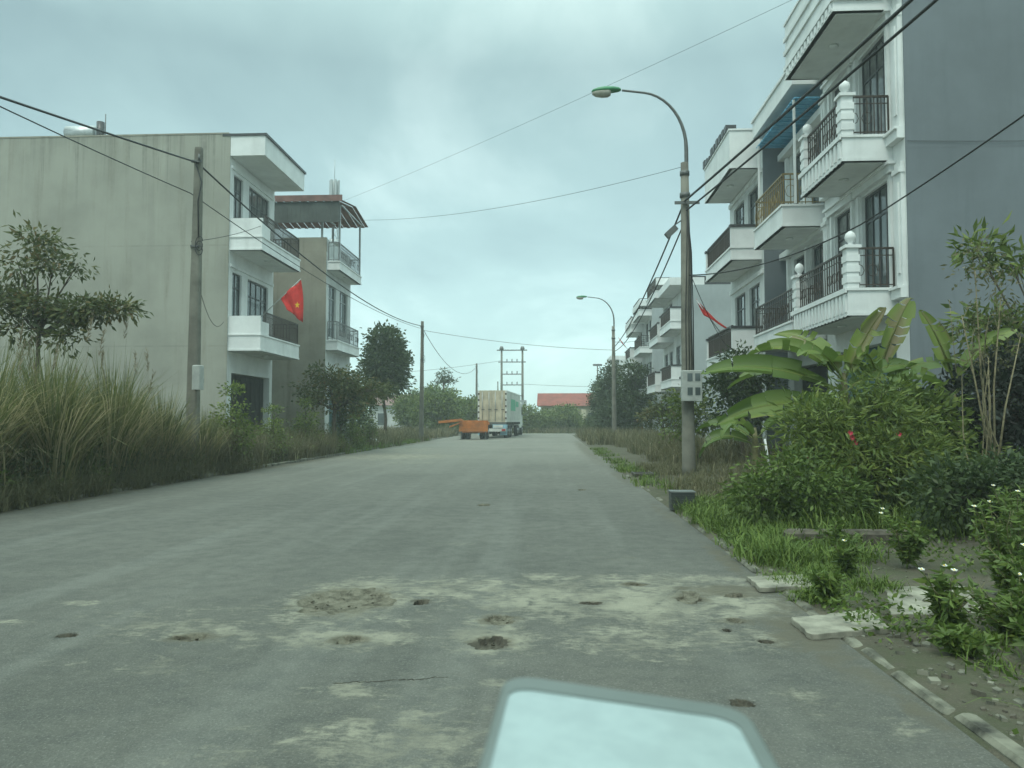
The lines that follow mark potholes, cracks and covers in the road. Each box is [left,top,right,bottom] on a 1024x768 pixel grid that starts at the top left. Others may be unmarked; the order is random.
pothole [453,631,524,654]
pothole [318,633,379,648]
pothole [665,588,714,607]
pothole [393,597,441,608]
pothole [743,636,789,648]
pothole [469,612,527,629]
pothole [284,585,415,618]
crack [322,673,462,690]
pothole [567,599,614,608]
pothole [154,631,224,646]
